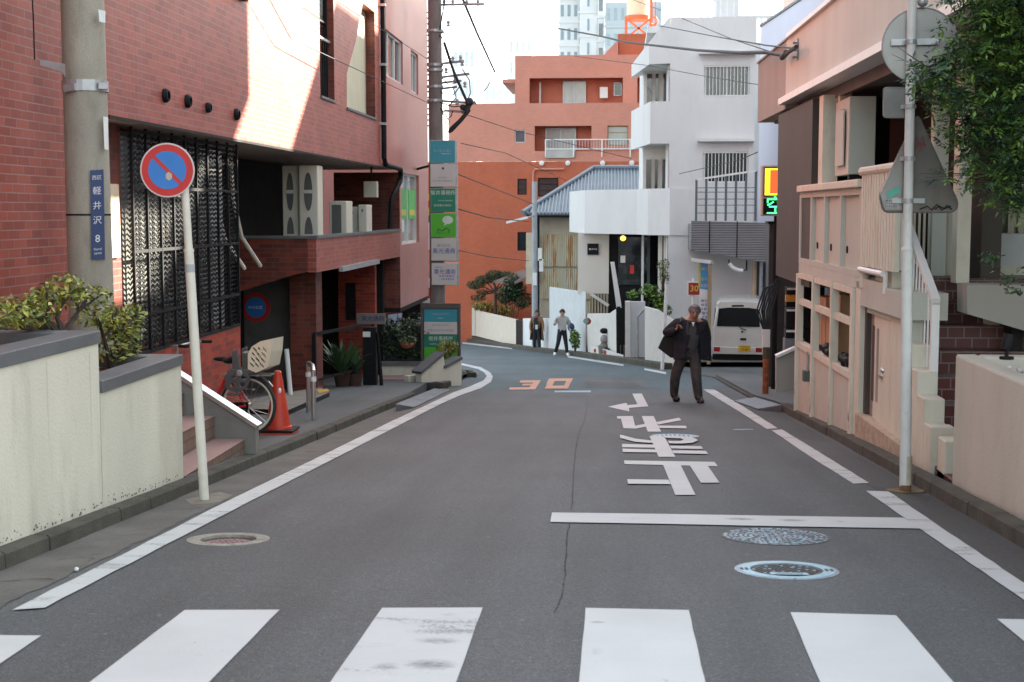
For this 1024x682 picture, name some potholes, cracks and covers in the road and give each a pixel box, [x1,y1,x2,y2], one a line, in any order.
crack [555,397,588,611]
manhole cover [734,561,839,580]
manhole cover [721,528,831,546]
manhole cover [186,533,270,546]
